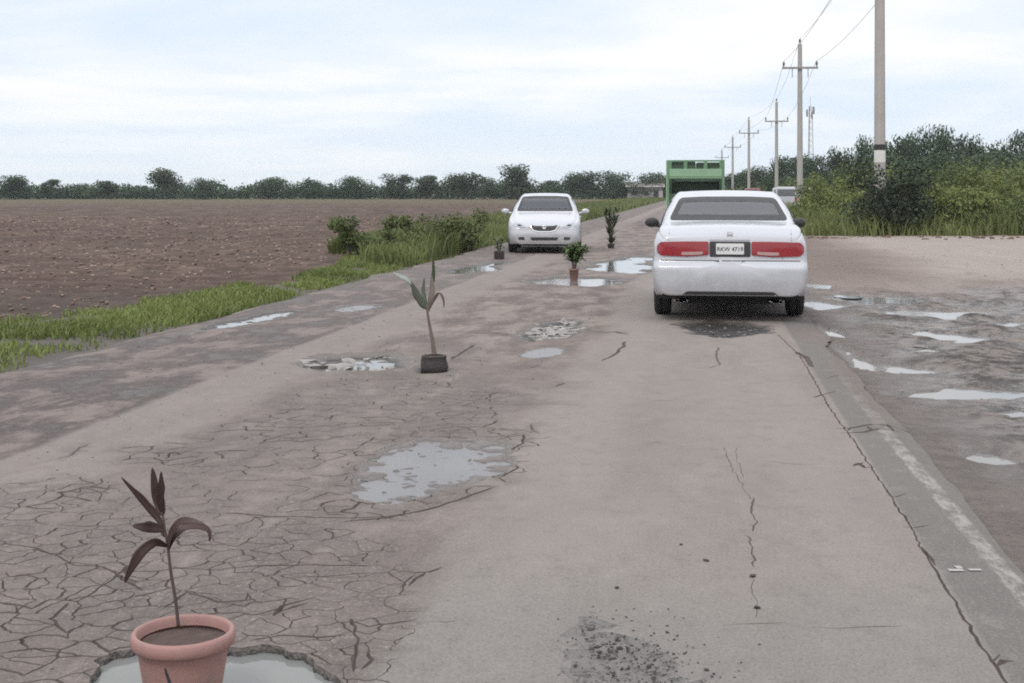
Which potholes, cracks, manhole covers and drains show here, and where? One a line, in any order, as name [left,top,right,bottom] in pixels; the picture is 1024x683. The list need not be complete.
crack [119,379,549,522]
pothole [89,644,343,683]
crack [594,331,631,361]
crack [778,335,1014,683]
pothole [348,437,518,505]
pothole [577,255,653,274]
crack [0,474,442,683]
pothole [511,317,590,342]
pothole [519,347,566,359]
pothole [435,261,519,274]
pothole [292,352,415,371]
